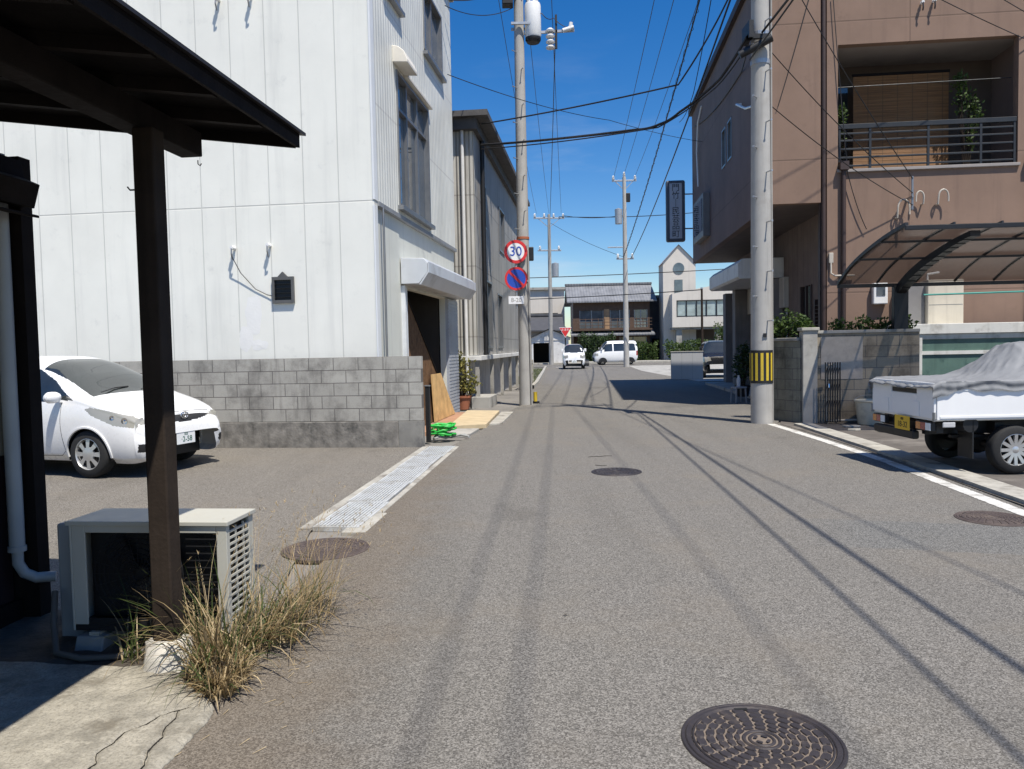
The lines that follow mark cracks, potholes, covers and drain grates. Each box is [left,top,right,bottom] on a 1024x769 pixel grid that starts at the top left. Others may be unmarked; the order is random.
drain grate [377,468,429,484]
drain grate [396,456,442,468]
manhole cover [591,467,642,476]
manhole cover [954,511,1024,527]
drain grate [313,502,389,532]
drain grate [347,483,409,503]
manhole cover [281,538,370,564]
drain grate [416,446,455,457]
manhole cover [681,703,848,769]
crack [88,707,189,769]
